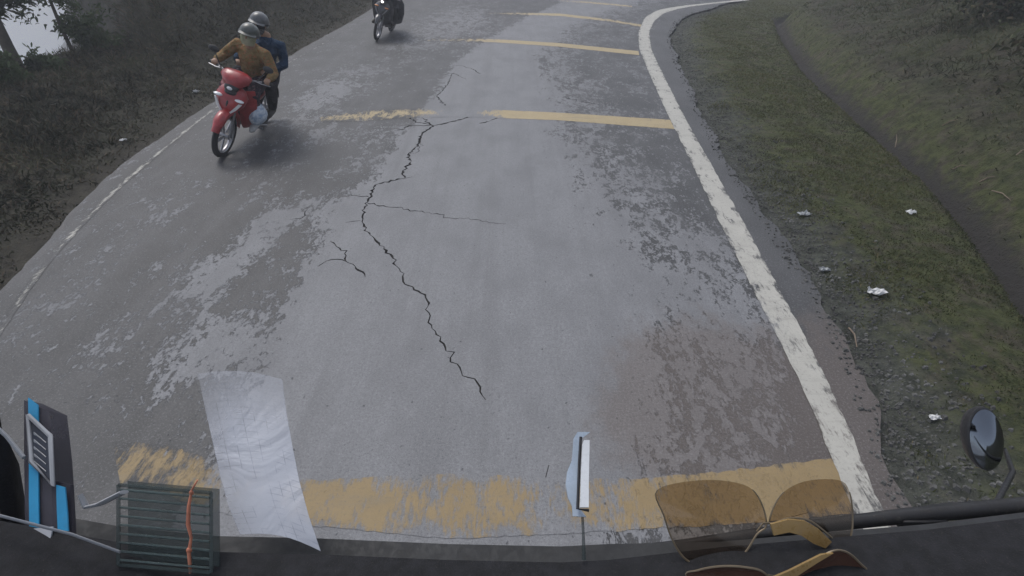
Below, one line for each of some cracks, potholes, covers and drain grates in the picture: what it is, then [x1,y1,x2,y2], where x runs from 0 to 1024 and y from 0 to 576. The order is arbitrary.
crack [317,65,500,400]
